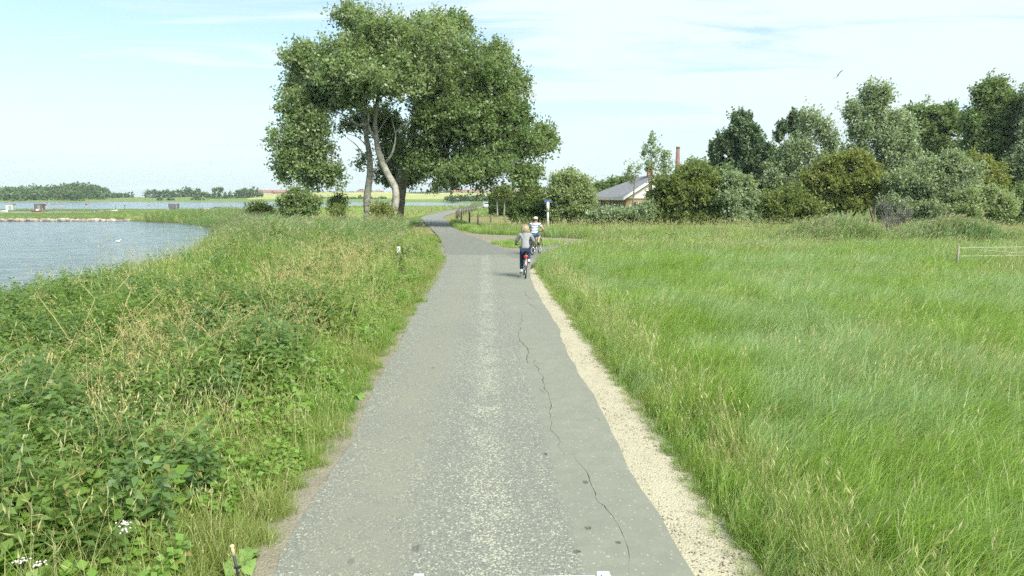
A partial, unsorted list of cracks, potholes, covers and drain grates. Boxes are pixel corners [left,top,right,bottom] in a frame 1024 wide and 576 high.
crack [518,294,562,451]
